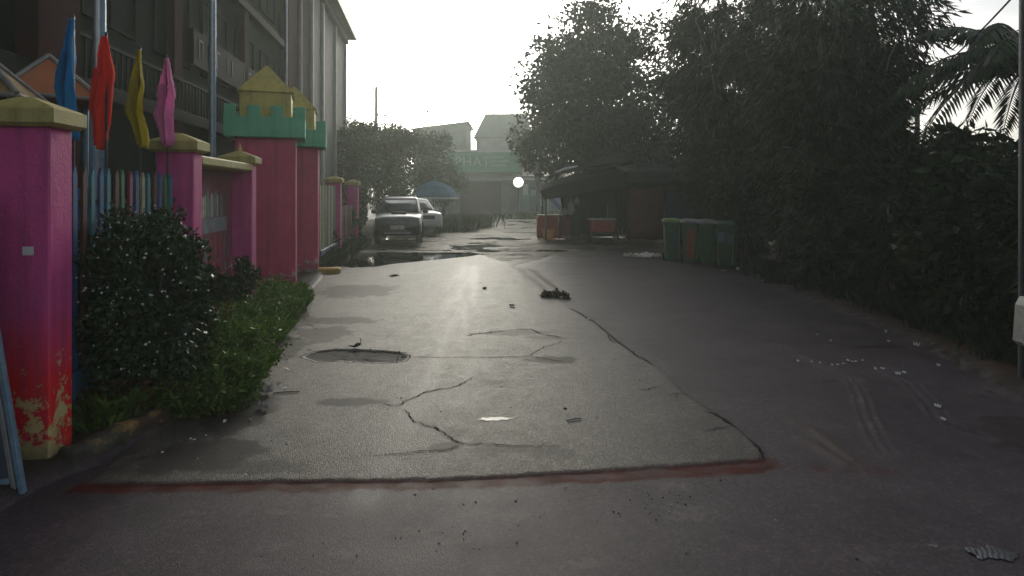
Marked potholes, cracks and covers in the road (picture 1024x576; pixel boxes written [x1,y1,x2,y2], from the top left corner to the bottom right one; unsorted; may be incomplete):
crack [379,377,553,456]
pothole [300,348,411,364]
crack [639,386,763,457]
crack [411,329,561,361]
